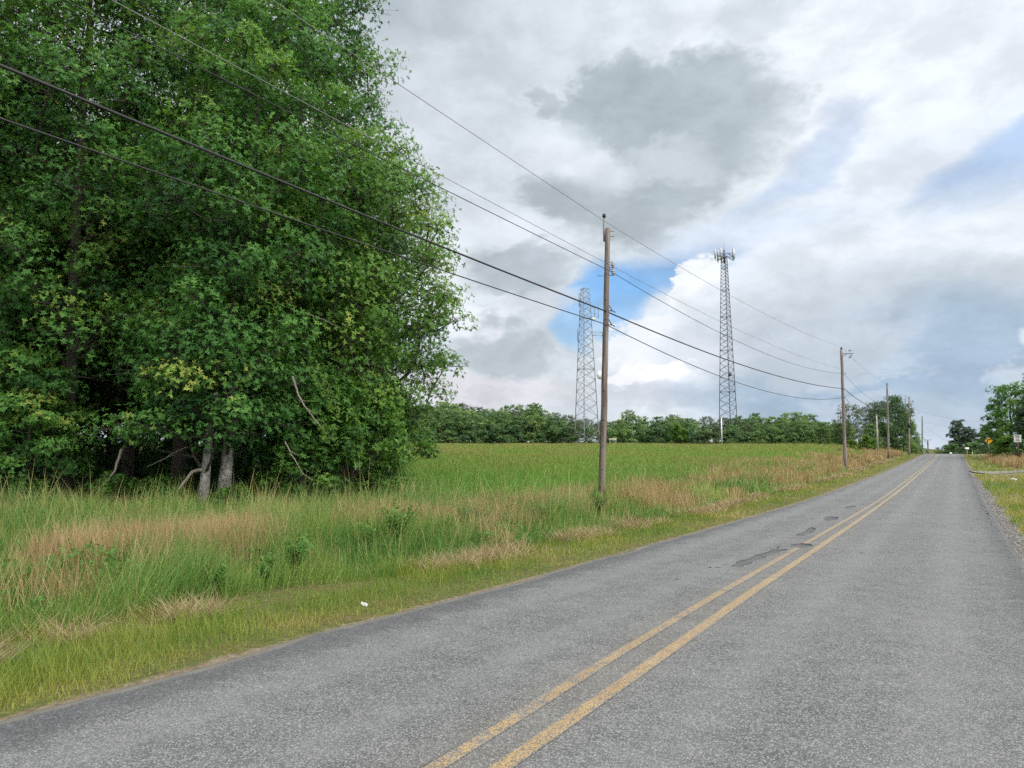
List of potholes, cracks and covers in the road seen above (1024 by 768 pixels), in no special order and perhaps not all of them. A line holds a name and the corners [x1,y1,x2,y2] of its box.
pothole [731,549,787,568]
